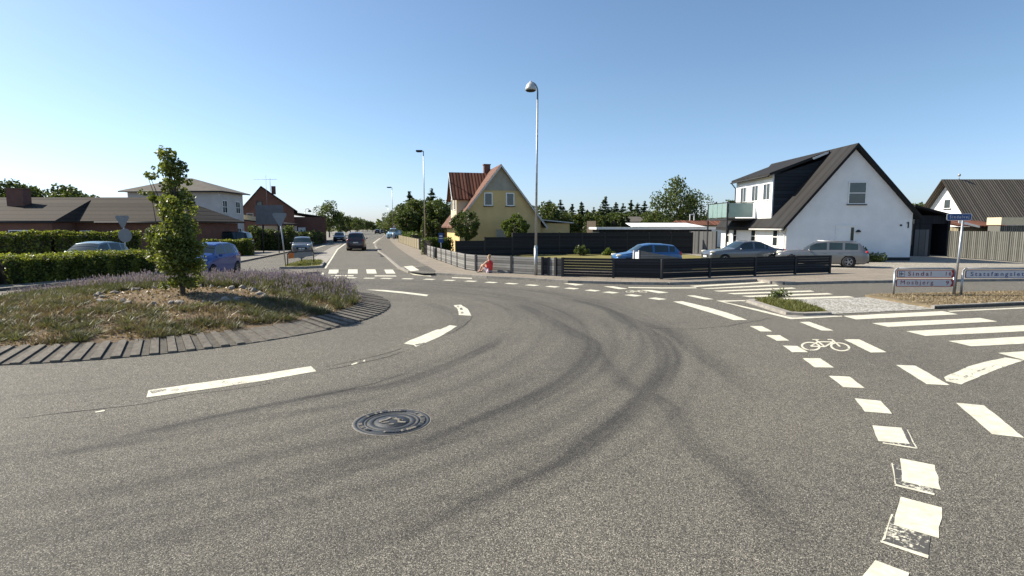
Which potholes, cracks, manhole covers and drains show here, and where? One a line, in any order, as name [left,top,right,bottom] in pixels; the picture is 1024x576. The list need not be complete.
manhole cover [352,409,431,436]
